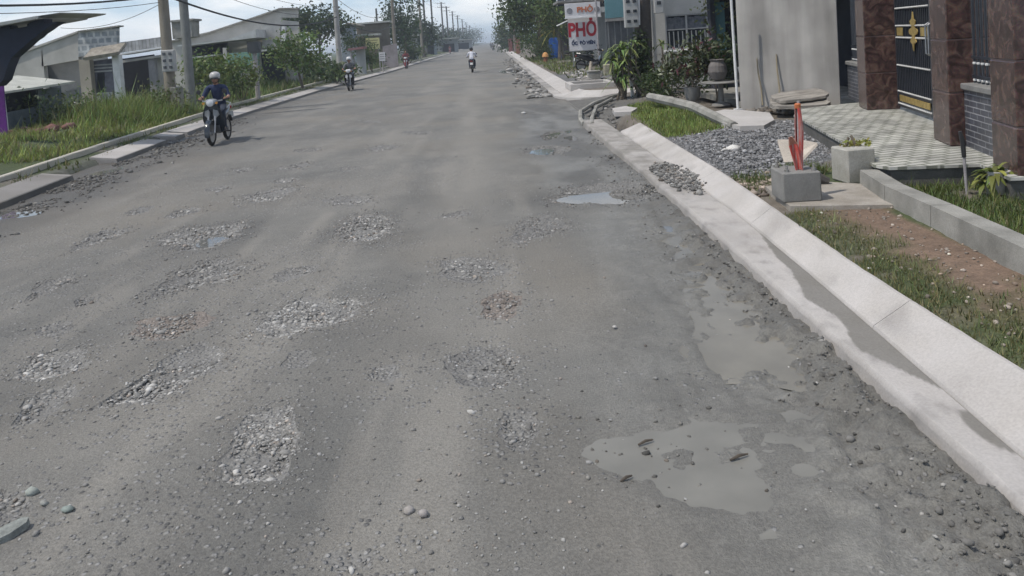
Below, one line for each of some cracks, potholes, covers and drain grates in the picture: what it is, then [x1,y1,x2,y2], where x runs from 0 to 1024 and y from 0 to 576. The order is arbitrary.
pothole [68,228,133,252]
pothole [11,386,79,426]
pothole [506,216,570,244]
pothole [158,222,248,252]
pothole [11,347,92,382]
pothole [333,214,394,242]
pothole [497,406,540,451]
pothole [480,290,522,320]
pothole [242,186,301,204]
pothole [253,297,369,338]
pothole [217,402,302,485]
pothole [443,346,524,390]
